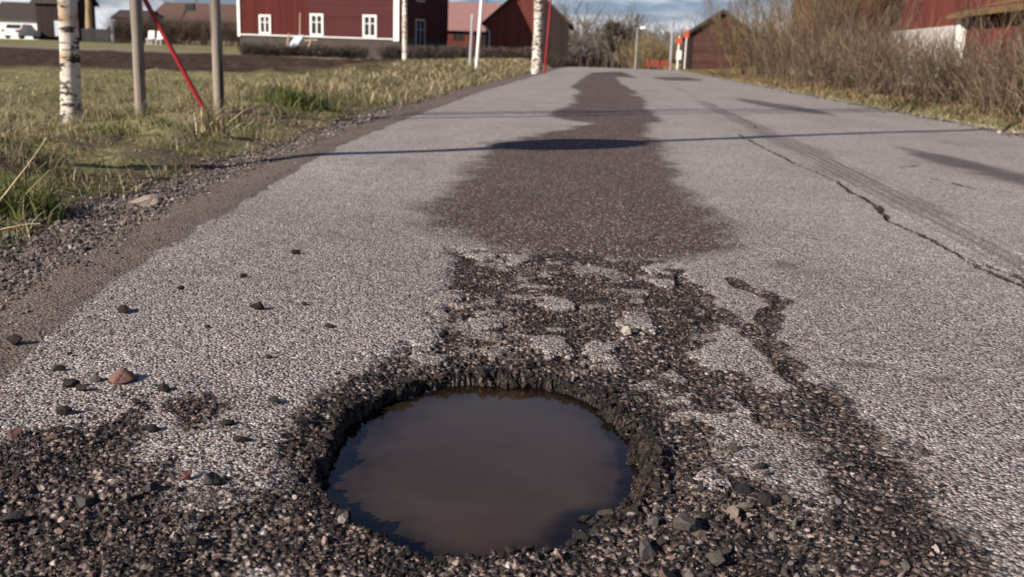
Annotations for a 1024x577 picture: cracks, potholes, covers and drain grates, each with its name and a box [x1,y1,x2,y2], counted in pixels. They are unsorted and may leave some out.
pothole [306,368,666,562]
crack [900,165,1014,193]
